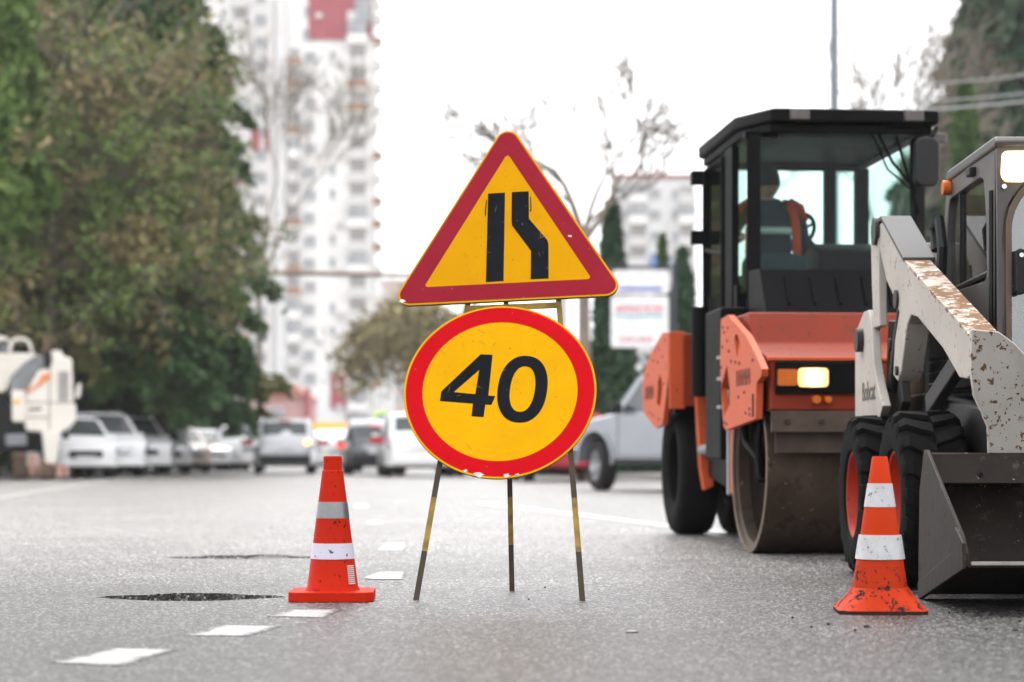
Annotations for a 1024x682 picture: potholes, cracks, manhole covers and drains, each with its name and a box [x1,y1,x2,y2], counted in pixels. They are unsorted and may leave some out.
pothole [100,593,285,601]
